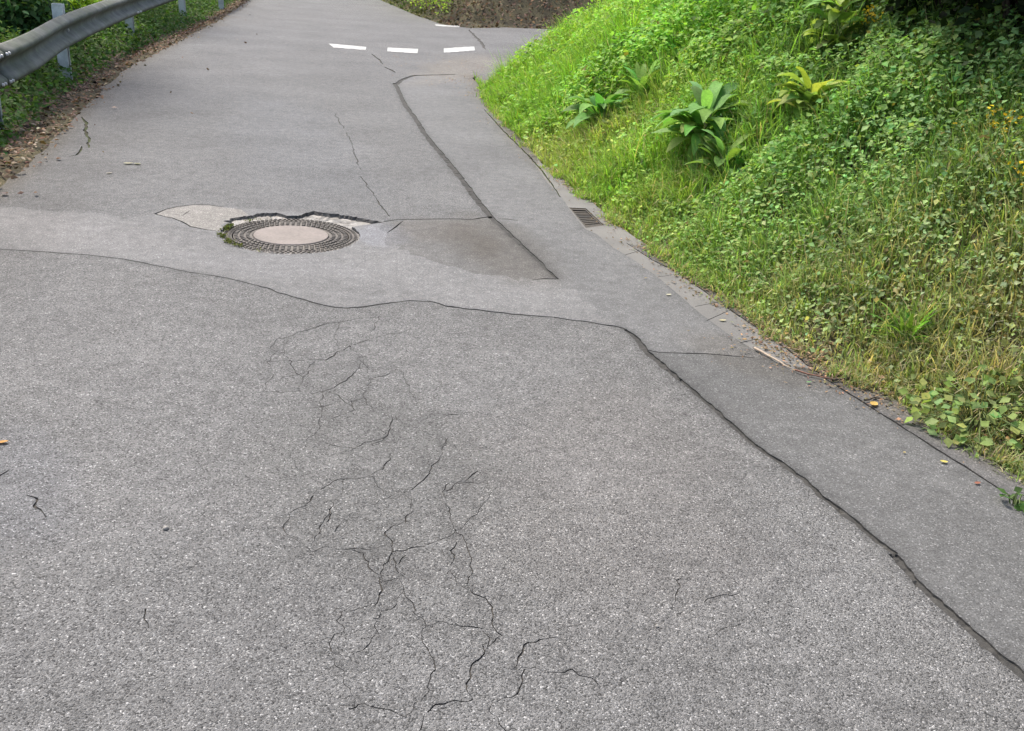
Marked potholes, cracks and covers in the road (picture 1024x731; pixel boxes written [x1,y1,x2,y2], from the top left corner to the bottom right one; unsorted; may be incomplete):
manhole cover [224,219,358,254]
crack [265,317,598,731]
drain grate [570,208,603,228]
crack [27,495,46,517]
crack [335,114,517,233]
crack [72,117,91,156]
